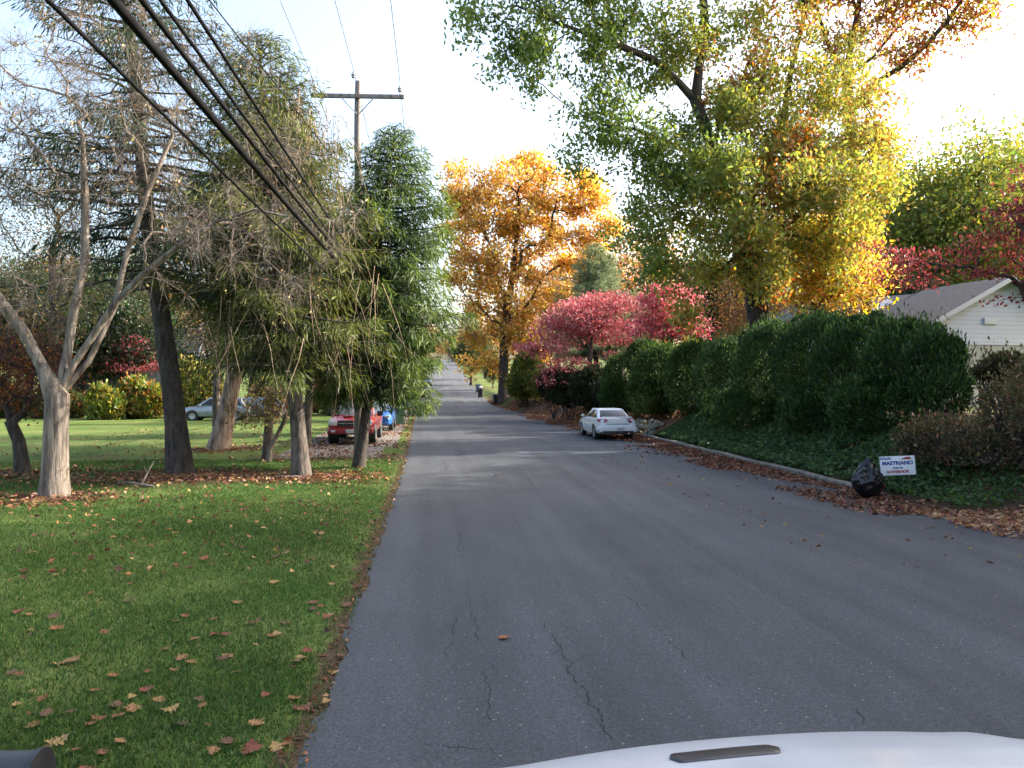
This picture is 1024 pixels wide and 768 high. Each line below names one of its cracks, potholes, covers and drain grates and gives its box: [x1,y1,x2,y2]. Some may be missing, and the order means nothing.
crack [542,621,612,739]
crack [480,664,497,724]
crack [444,579,479,672]
crack [618,595,715,682]
